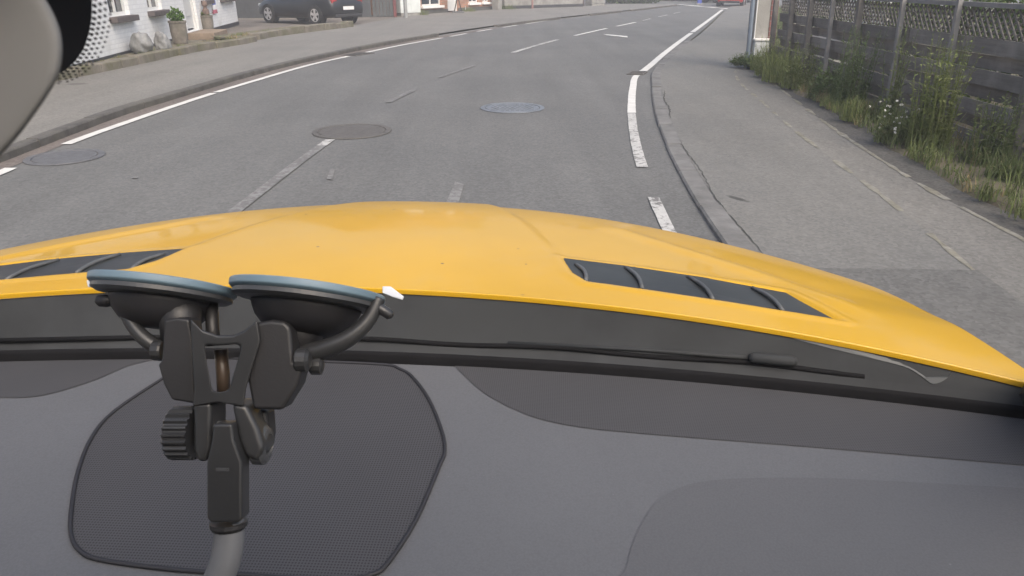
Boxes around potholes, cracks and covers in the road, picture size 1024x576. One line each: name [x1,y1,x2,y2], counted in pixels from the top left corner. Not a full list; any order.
manhole cover [312,123,392,139]
manhole cover [480,102,544,113]
manhole cover [22,149,106,166]
crack [679,139,761,251]
